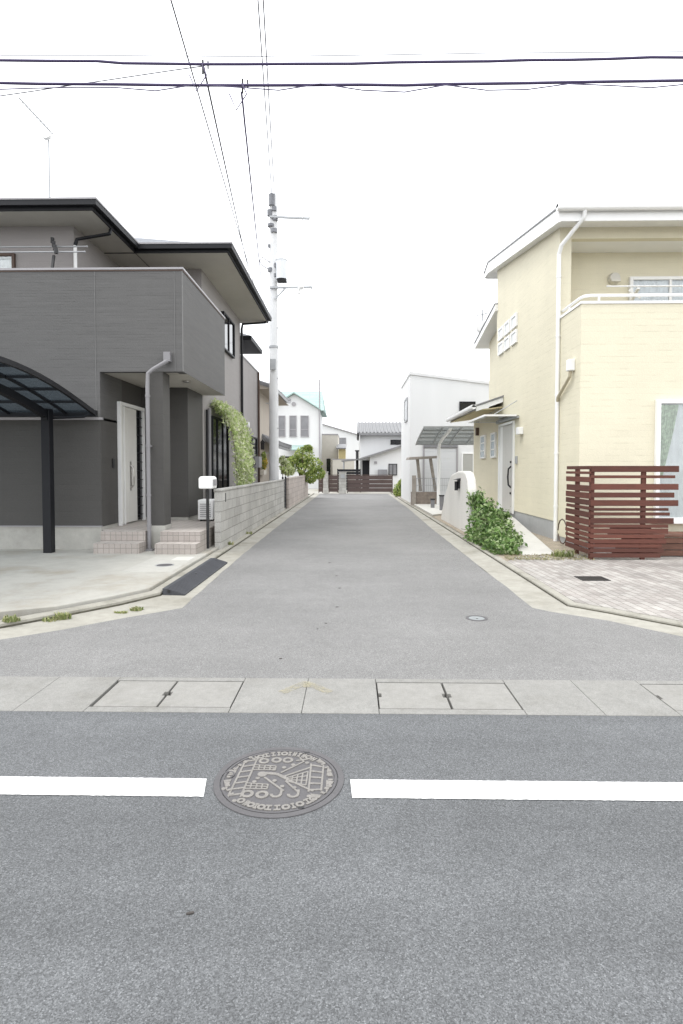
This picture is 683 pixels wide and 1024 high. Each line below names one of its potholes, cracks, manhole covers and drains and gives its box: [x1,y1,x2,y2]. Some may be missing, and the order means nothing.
manhole cover [213,747,344,819]
